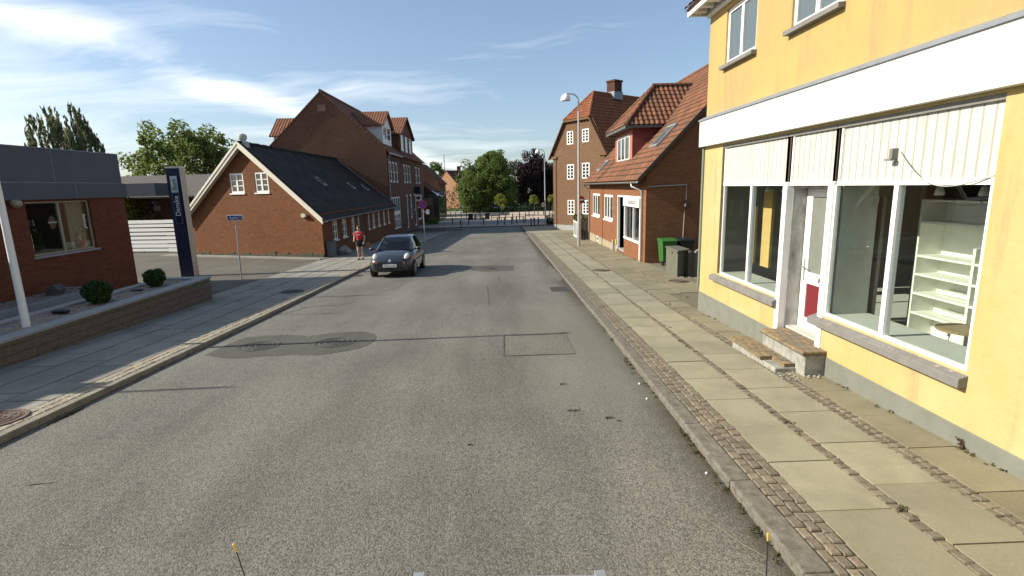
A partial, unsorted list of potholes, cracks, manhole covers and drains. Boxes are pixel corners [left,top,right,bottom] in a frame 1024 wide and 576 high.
manhole cover [0,409,30,427]
manhole cover [313,337,356,348]
manhole cover [237,340,281,351]
